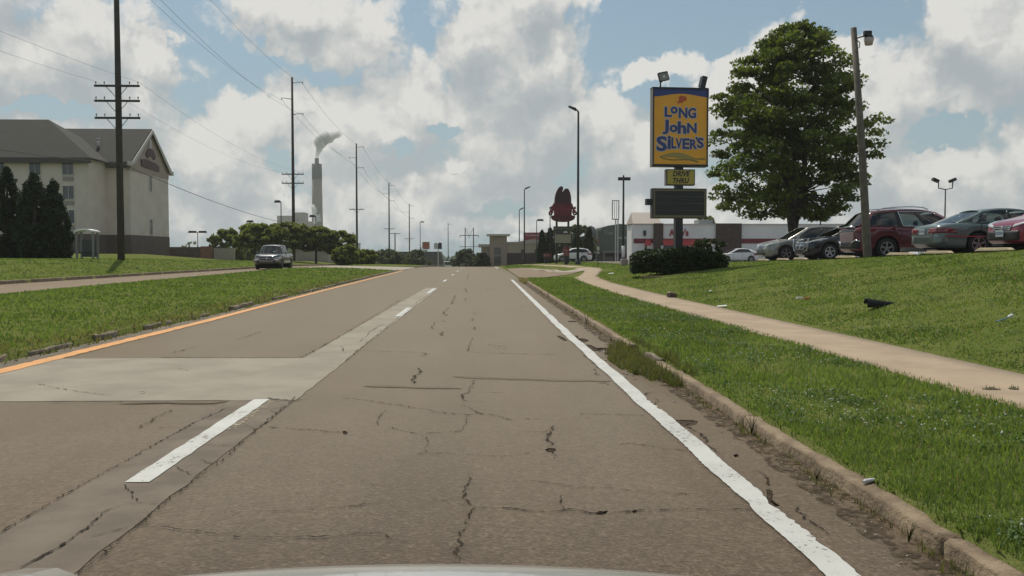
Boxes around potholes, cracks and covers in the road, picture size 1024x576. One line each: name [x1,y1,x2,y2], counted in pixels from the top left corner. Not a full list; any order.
crack [758,471,828,533]
crack [342,296,513,383]
crack [345,380,556,459]
